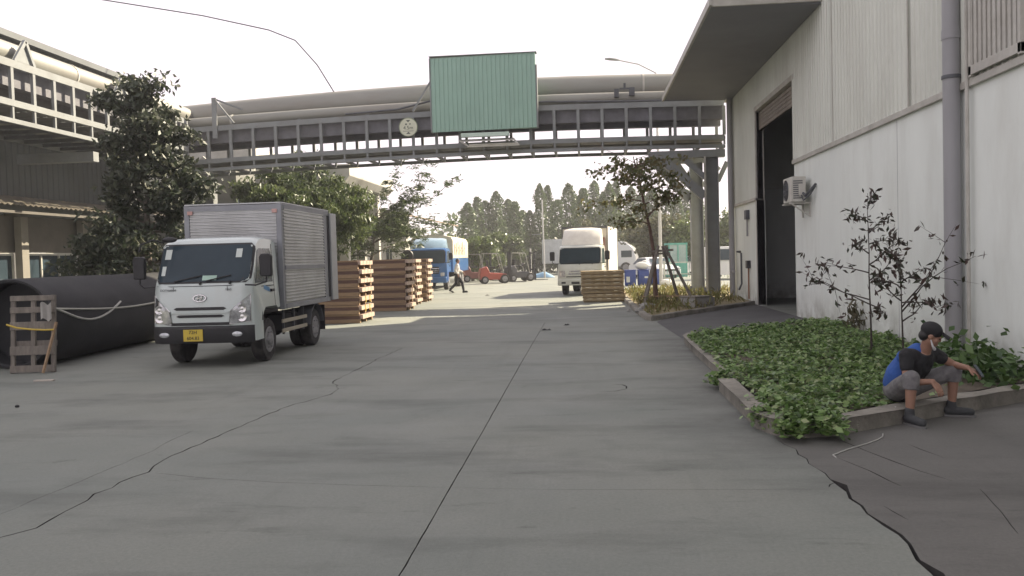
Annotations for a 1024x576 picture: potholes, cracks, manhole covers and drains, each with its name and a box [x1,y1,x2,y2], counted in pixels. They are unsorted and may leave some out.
crack [778,438,945,576]
crack [1,350,397,537]
